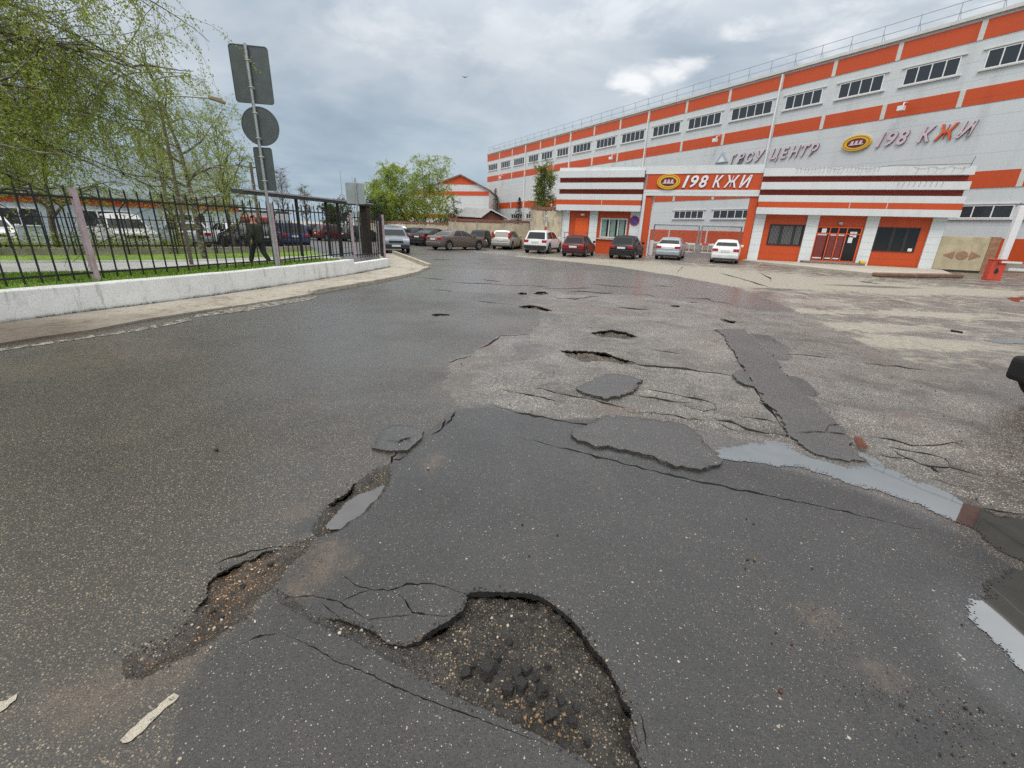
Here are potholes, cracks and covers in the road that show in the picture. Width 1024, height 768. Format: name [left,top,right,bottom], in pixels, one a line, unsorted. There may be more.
pothole [592,330,637,340]
crack [284,575,461,623]
crack [492,348,933,531]
crack [432,411,456,435]
pothole [311,462,393,537]
crack [245,632,577,756]
crack [391,436,414,464]
crack [874,437,979,487]
pothole [561,350,636,365]
pothole [275,588,641,768]
pothole [120,538,315,681]
